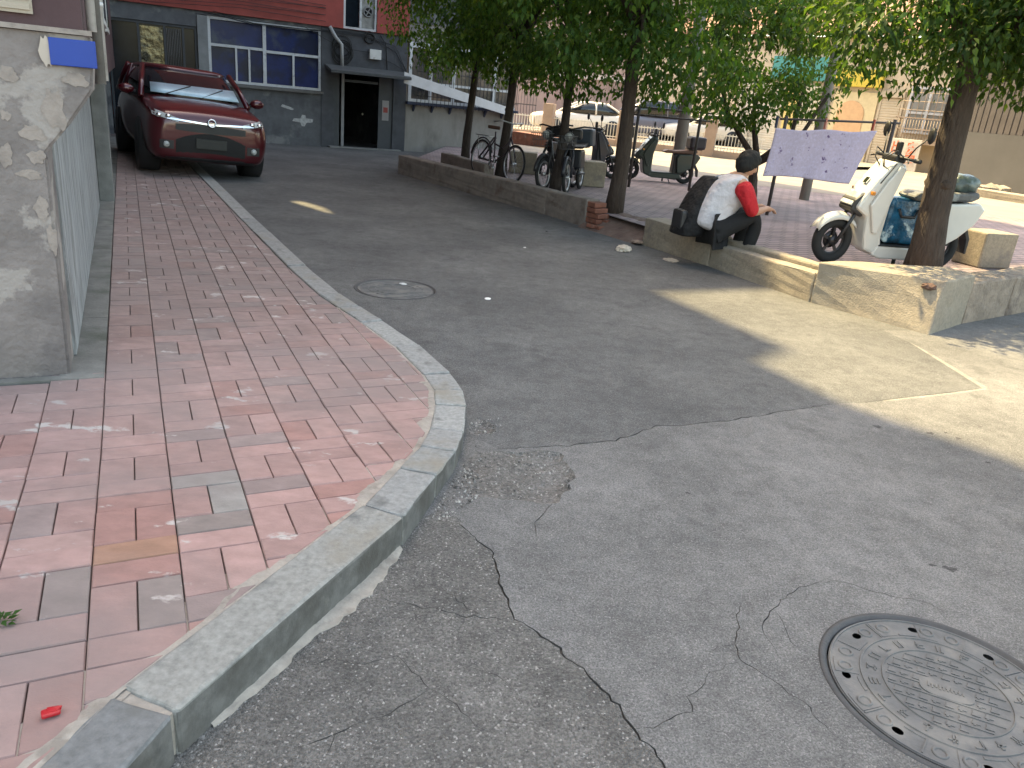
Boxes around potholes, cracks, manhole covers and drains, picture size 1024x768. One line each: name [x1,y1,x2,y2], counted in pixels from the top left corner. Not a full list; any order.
pothole [461,450,576,504]
crack [762,580,944,655]
manhole cover [354,279,437,300]
manhole cover [818,613,1024,768]
crack [300,518,844,768]
